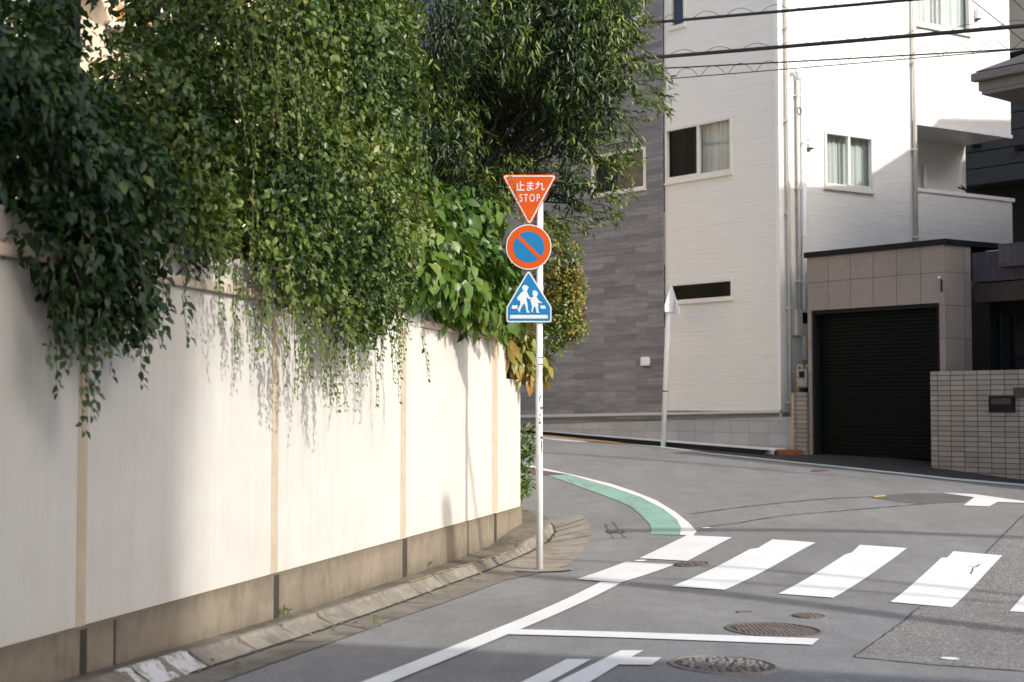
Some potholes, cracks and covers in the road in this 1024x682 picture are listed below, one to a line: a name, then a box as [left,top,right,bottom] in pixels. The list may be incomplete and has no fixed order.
manhole cover [669,655,780,675]
manhole cover [725,622,824,638]
